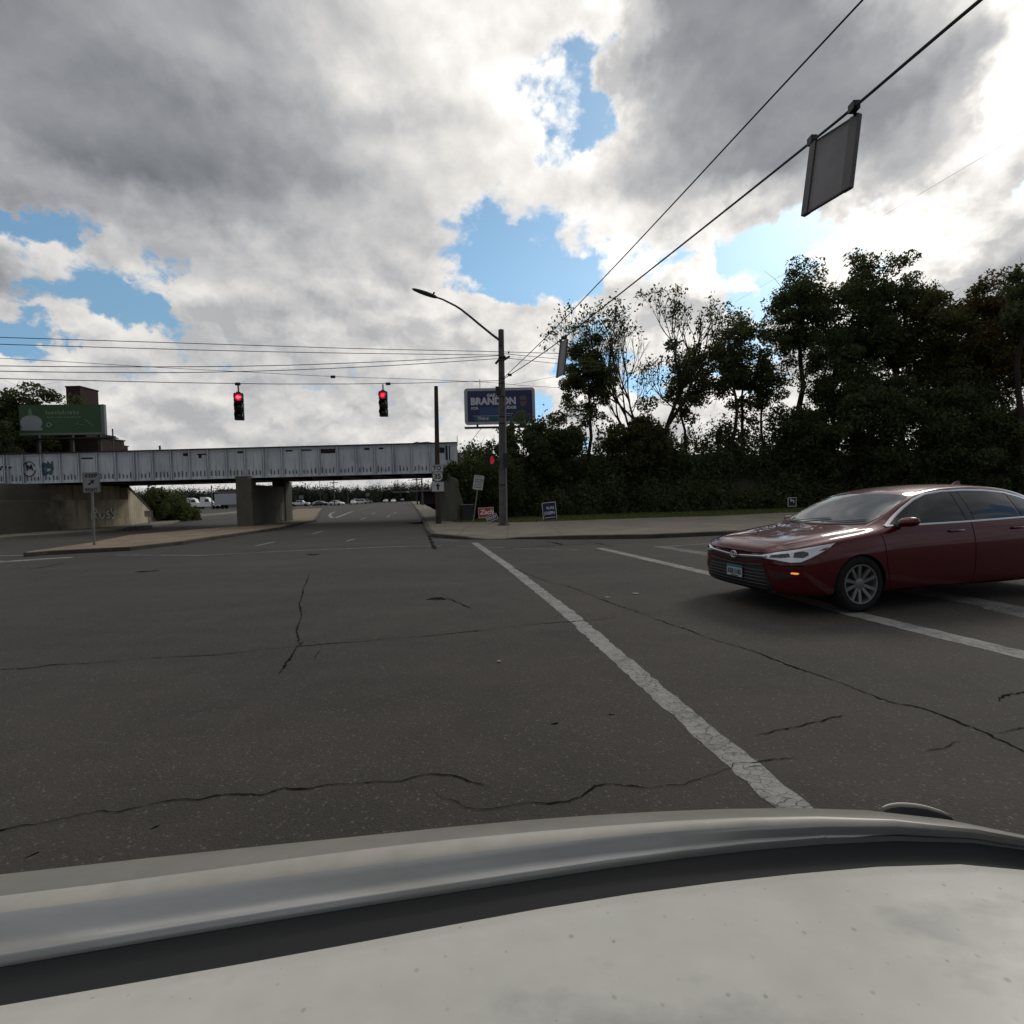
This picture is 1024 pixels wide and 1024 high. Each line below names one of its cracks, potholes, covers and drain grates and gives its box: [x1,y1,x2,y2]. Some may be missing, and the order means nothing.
crack [513,567,1024,752]
crack [434,757,793,809]
crack [279,577,321,673]
crack [0,773,489,831]
